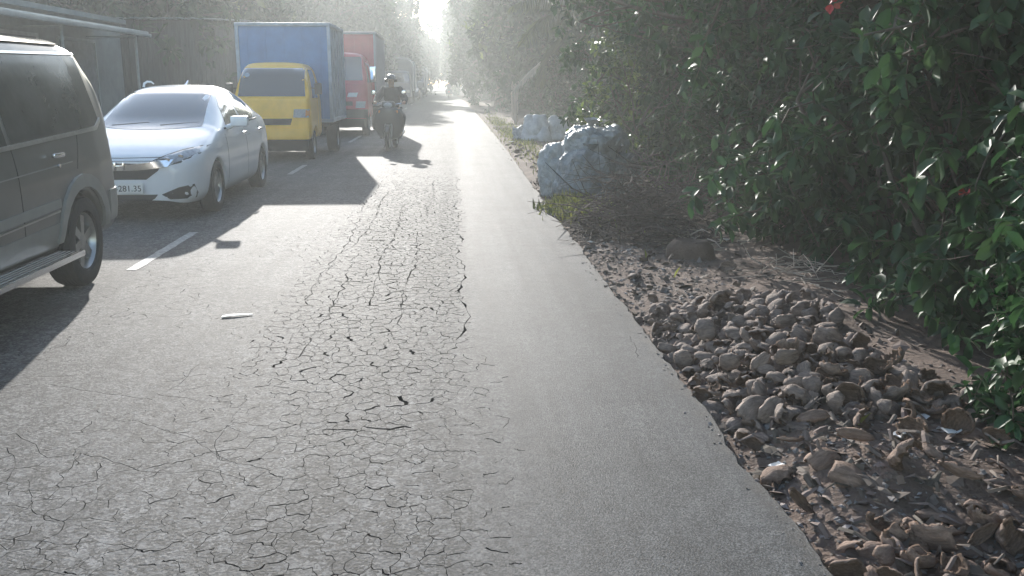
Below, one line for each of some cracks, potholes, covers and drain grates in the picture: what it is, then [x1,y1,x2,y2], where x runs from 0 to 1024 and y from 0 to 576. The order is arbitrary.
crack [0,214,345,576]
crack [64,172,524,576]
